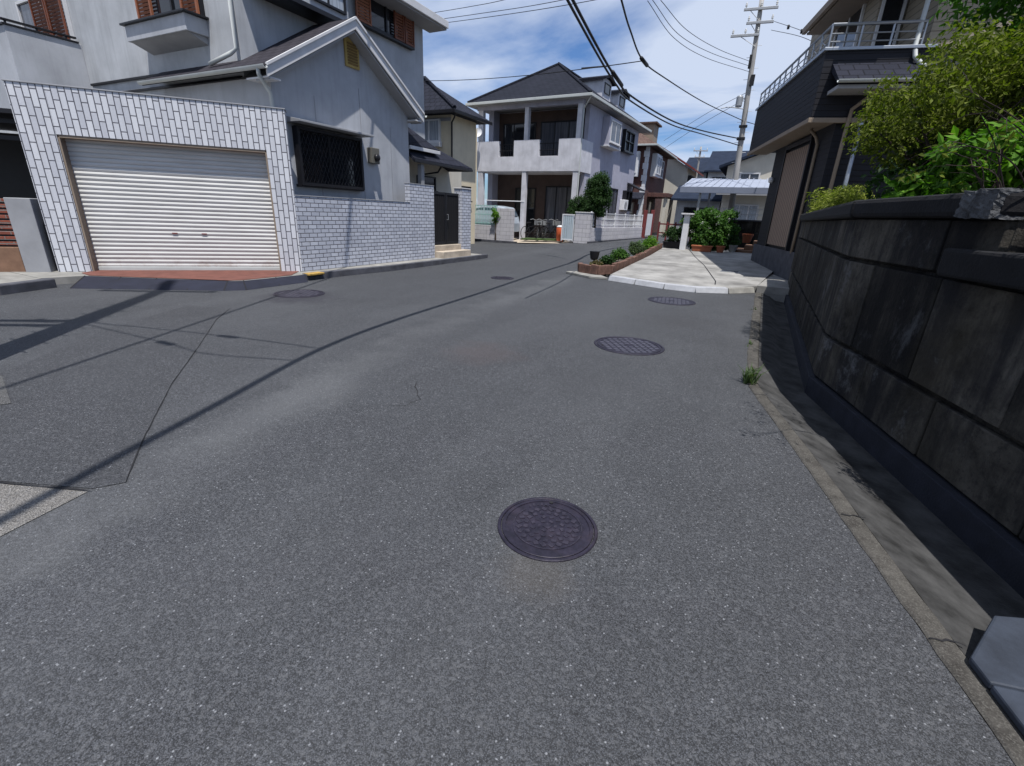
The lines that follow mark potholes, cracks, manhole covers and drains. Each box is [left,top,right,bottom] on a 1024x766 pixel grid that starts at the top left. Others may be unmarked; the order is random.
manhole cover [594,336,665,356]
manhole cover [273,289,325,298]
manhole cover [497,497,598,562]
manhole cover [648,297,696,305]
